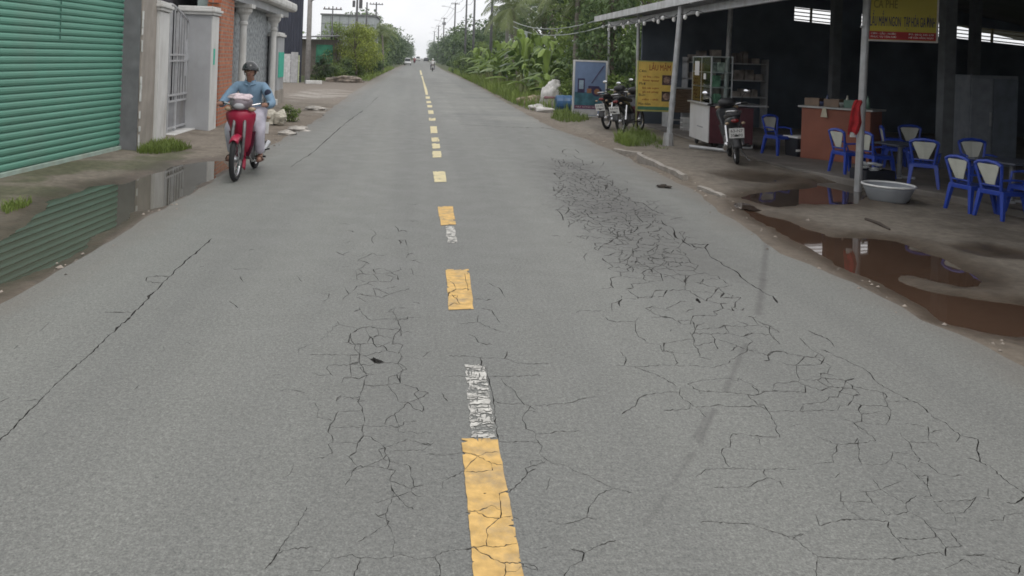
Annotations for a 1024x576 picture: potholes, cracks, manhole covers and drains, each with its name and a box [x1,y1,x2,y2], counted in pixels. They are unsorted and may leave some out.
crack [128,204,631,576]
crack [552,199,1024,576]
crack [0,239,211,440]
